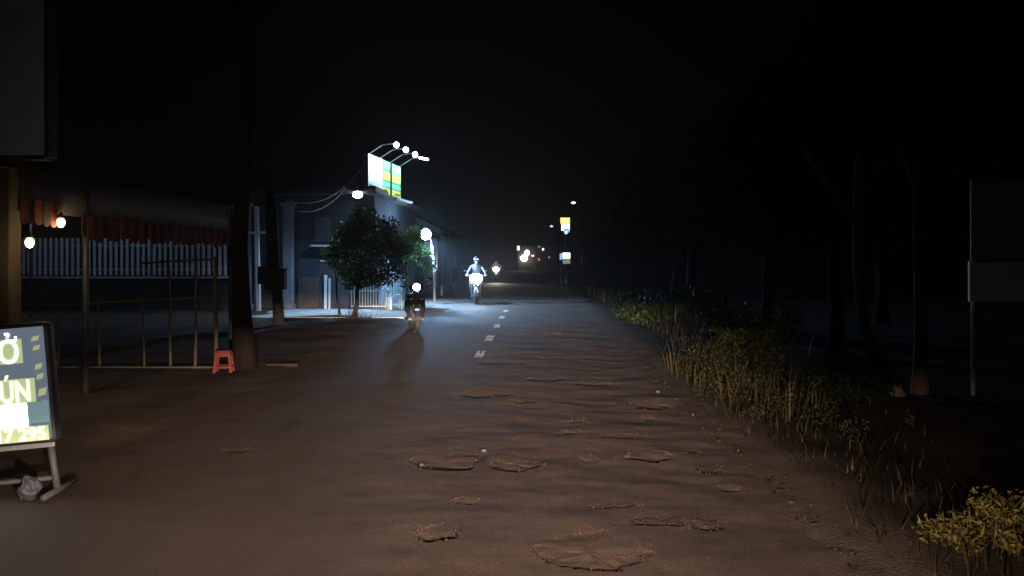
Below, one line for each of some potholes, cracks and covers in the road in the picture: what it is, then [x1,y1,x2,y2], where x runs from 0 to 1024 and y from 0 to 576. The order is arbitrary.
pothole [586,501,637,509]
pothole [408,450,488,471]
pothole [625,401,671,410]
pothole [629,516,689,527]
pothole [578,454,601,464]
pothole [457,387,513,399]
pothole [488,454,544,473]
pothole [413,523,461,543]
pothole [526,529,657,572]
pothole [452,497,478,505]
pothole [623,449,675,464]
